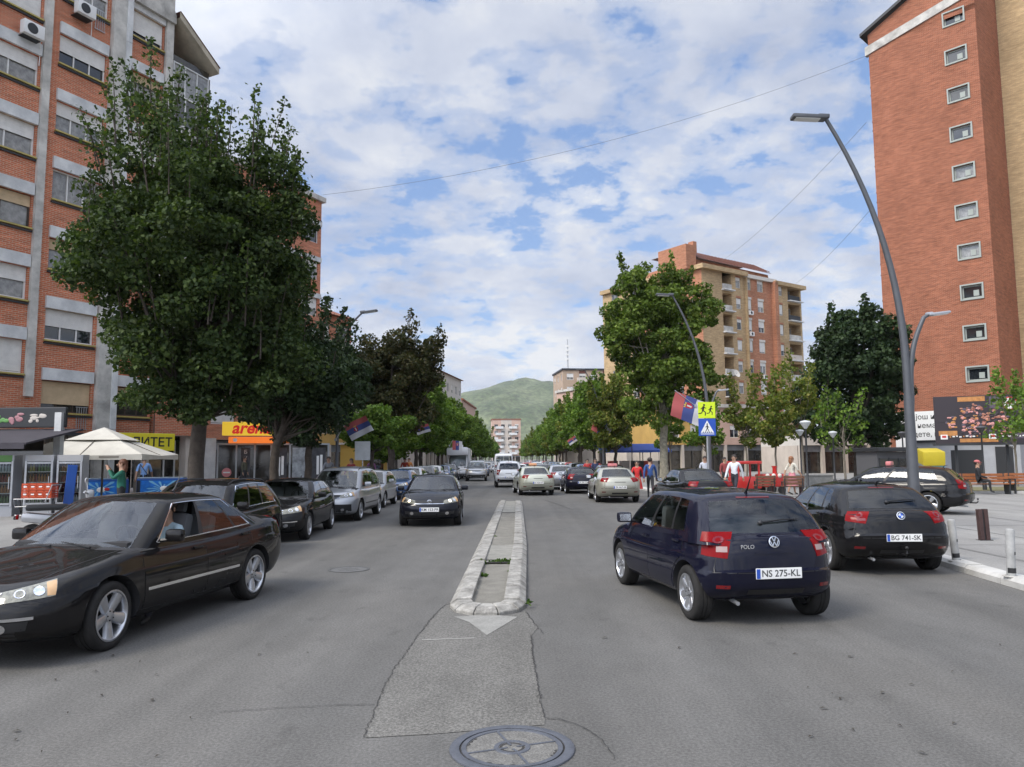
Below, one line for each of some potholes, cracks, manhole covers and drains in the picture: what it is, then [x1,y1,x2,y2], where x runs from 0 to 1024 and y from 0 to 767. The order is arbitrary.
manhole cover [449,725,575,767]
